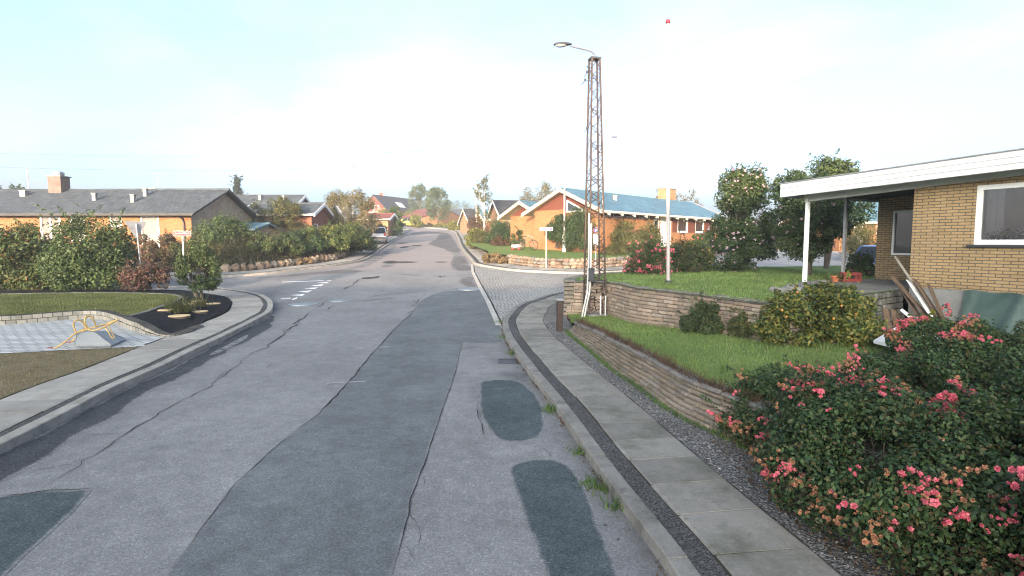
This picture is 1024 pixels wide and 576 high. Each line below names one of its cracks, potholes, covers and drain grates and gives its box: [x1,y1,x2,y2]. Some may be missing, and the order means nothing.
crack [48,274,441,484]
